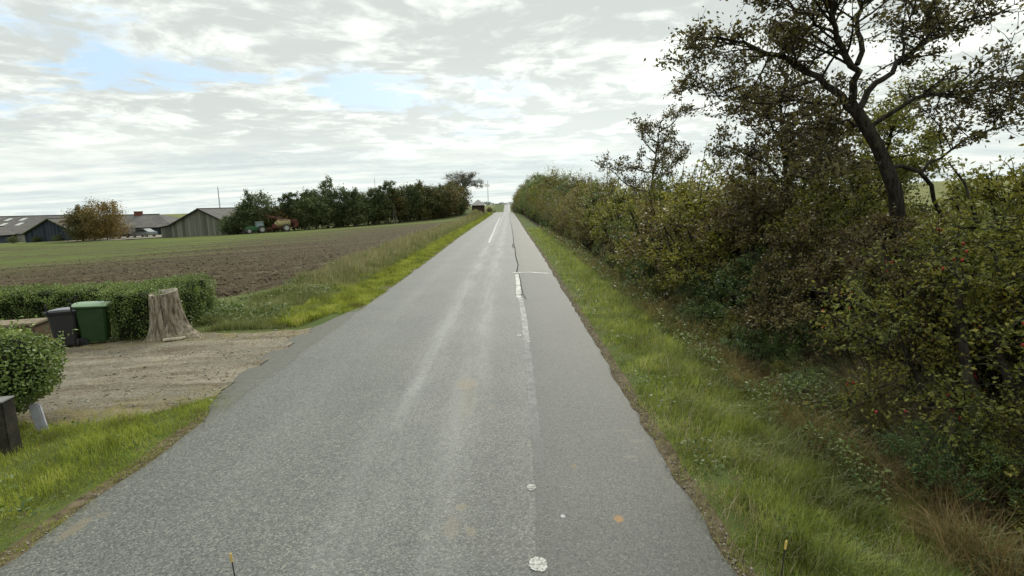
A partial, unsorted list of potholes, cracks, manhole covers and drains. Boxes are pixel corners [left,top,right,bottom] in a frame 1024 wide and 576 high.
crack [510,222,526,298]
